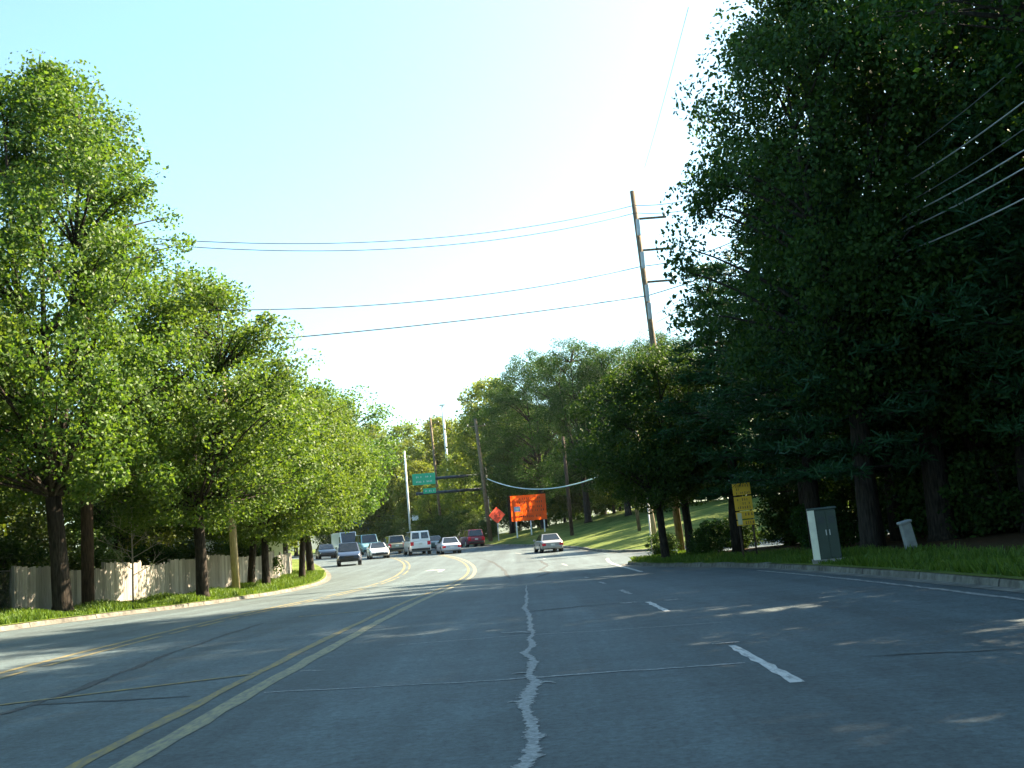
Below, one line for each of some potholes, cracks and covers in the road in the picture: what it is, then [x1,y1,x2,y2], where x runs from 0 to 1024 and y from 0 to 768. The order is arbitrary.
crack [263,558,745,768]
